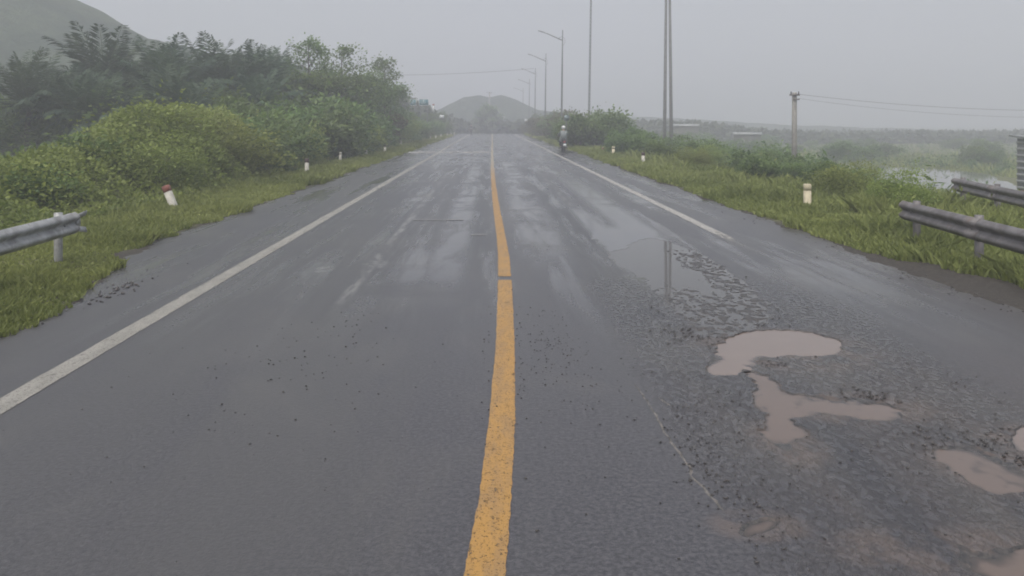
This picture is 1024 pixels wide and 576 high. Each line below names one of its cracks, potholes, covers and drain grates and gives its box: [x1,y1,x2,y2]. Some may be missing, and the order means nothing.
pothole [931,445,1024,495]
pothole [1010,425,1024,453]
pothole [705,328,844,376]
pothole [956,544,1024,576]
pothole [739,517,780,537]
pothole [742,369,906,451]
crack [634,383,724,511]
